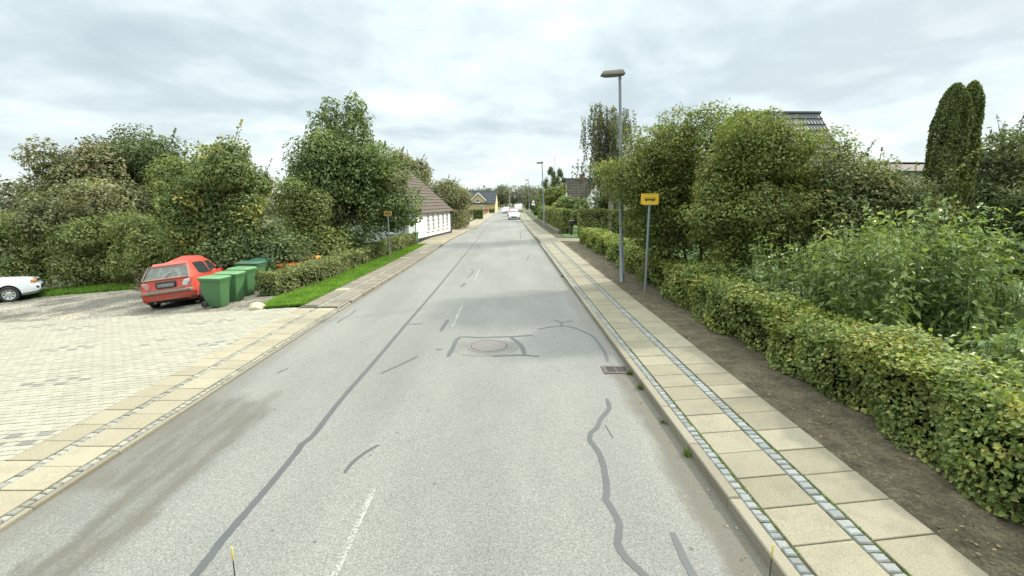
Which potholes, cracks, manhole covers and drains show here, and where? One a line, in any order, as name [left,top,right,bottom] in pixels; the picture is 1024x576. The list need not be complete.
drain grate [601,366,629,374]
manhole cover [454,339,520,356]
